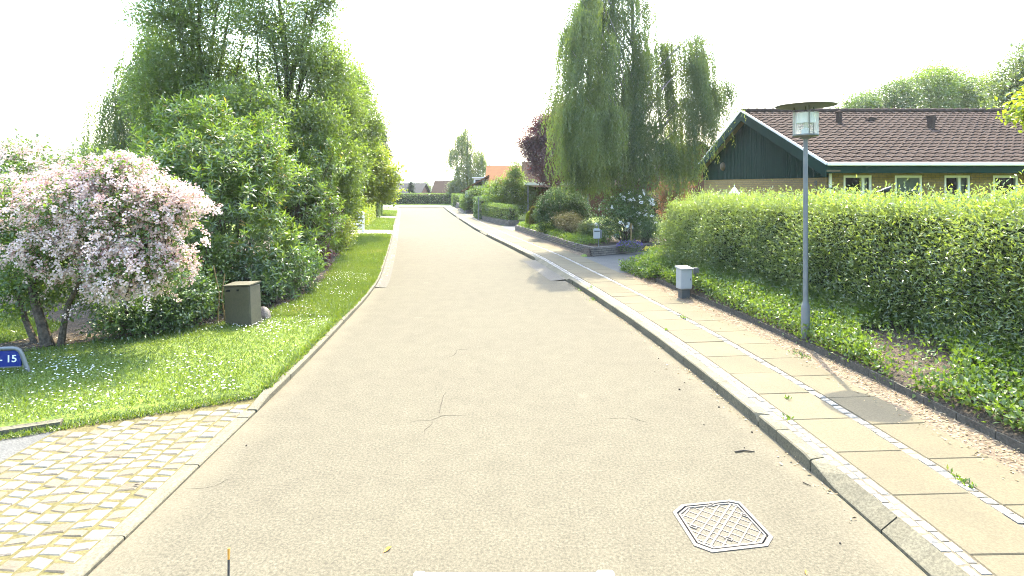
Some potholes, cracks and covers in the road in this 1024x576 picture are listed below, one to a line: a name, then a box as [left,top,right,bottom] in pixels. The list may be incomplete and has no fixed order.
manhole cover [673,500,773,553]
